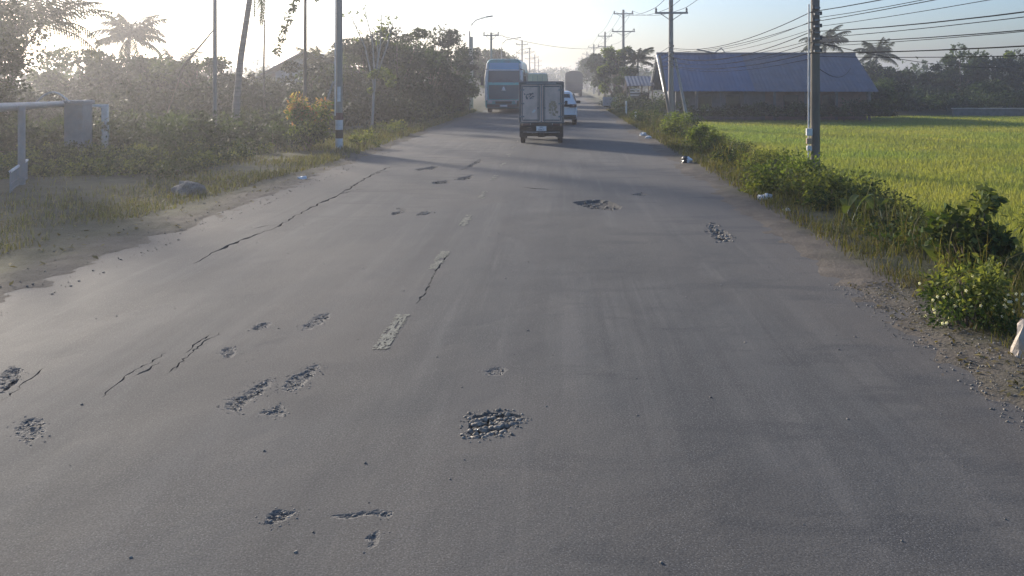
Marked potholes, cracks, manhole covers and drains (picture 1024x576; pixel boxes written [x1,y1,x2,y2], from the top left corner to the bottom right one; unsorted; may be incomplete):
pothole [247,322,277,331]
pothole [0,366,26,393]
pothole [216,377,278,415]
pothole [459,408,531,442]
pothole [483,367,510,377]
pothole [573,200,623,211]
pothole [363,529,390,553]
pothole [216,346,239,359]
pothole [7,416,51,446]
crack [417,256,447,303]
pothole [704,222,736,242]
pothole [255,505,301,531]
